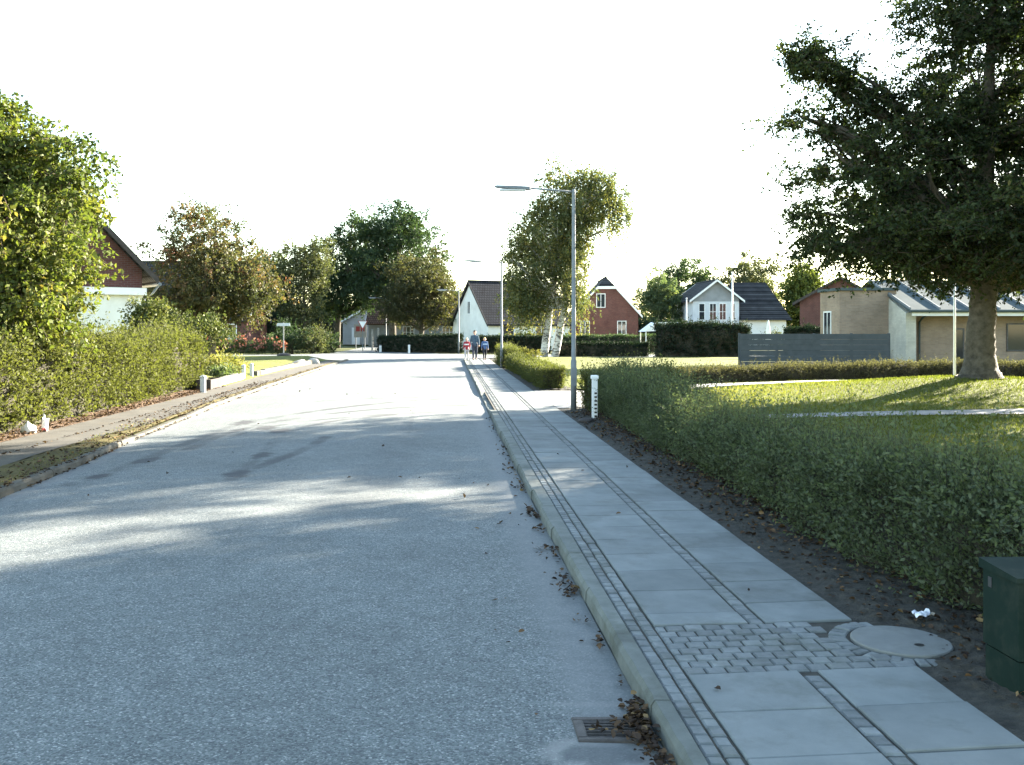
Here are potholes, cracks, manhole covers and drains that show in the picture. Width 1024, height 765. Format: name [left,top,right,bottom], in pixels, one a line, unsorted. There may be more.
drain grate [571,717,655,744]
manhole cover [850,626,954,660]
